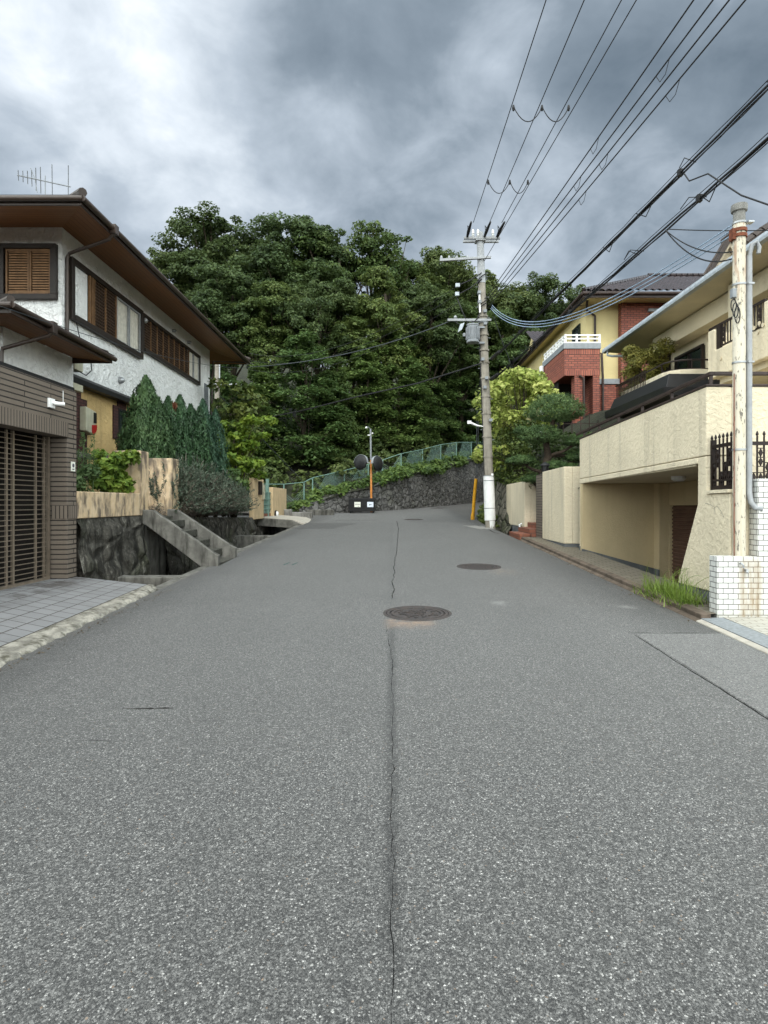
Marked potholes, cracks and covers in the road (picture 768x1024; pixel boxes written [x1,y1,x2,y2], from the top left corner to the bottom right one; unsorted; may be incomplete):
crack [386,625,395,1024]
crack [391,524,399,598]
manhole cover [383,606,452,621]
